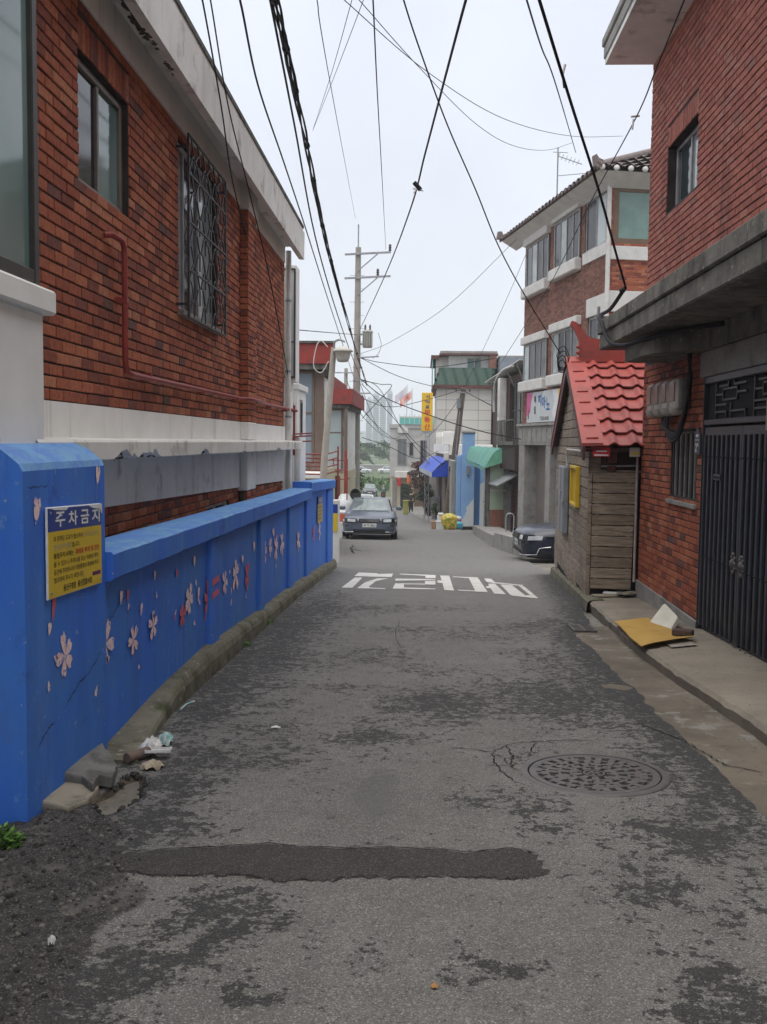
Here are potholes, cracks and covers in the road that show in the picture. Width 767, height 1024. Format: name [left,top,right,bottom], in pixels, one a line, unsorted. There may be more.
crack [454,739,577,782]
pothole [92,769,148,815]
manhole cover [521,753,671,797]
drain grate [567,624,597,633]
